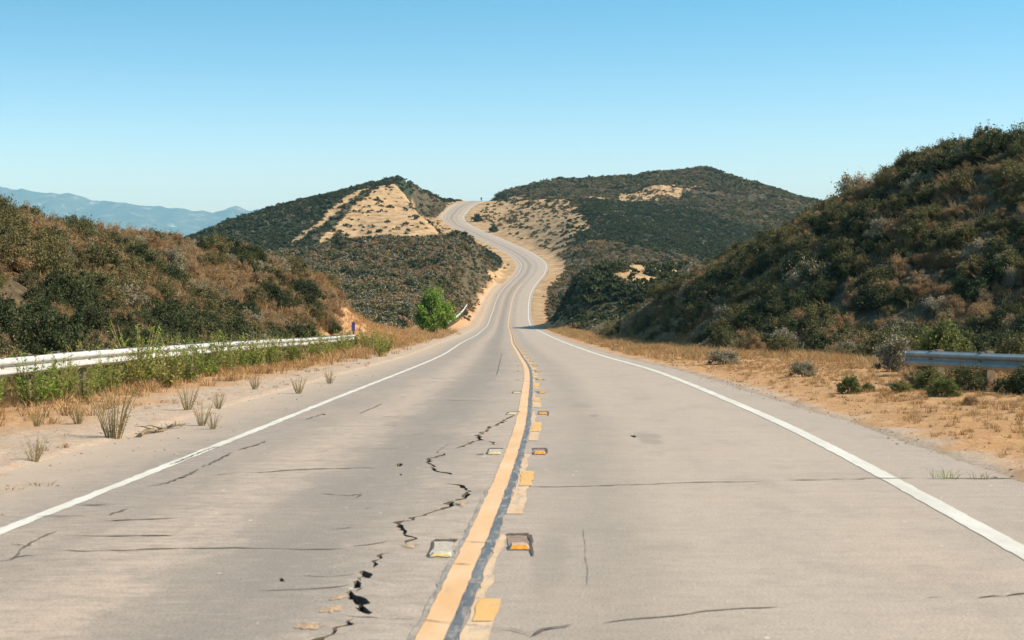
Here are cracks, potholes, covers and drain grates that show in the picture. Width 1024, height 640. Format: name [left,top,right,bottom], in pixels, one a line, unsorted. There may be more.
crack [3,415,514,592]
crack [604,607,770,623]
crack [312,616,377,640]
crack [411,617,571,636]
